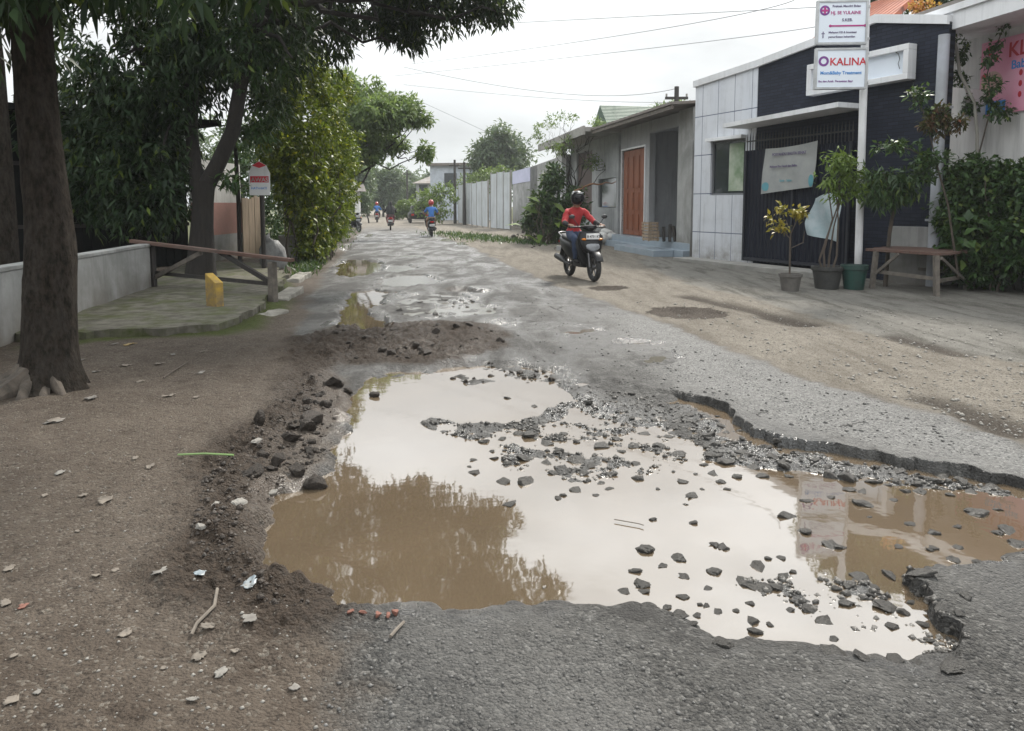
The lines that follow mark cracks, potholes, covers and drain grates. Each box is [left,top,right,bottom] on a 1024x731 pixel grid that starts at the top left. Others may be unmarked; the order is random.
pothole [644,306,730,320]
pothole [228,357,1024,689]
pothole [327,258,390,278]
pothole [324,287,402,329]
